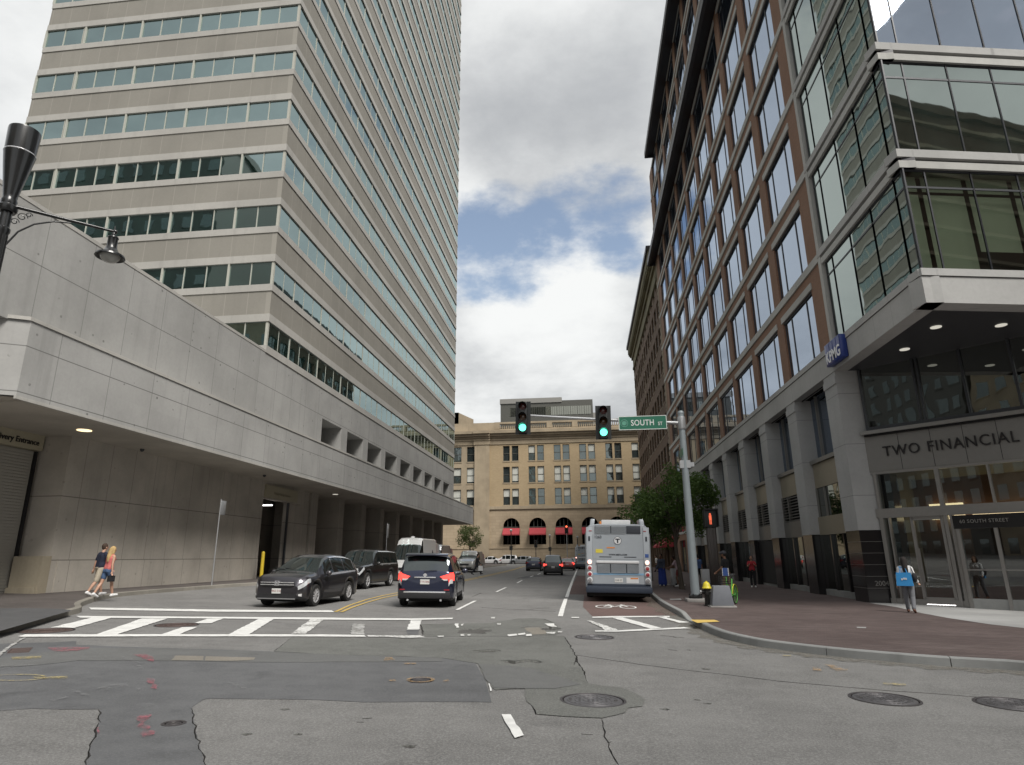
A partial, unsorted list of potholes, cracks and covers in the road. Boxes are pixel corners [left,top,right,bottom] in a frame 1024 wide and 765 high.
manhole cover [848,691,923,707]
crack [84,710,102,765]
manhole cover [560,693,627,708]
crack [192,710,206,765]
crack [566,640,587,681]
crack [584,720,619,765]
manhole cover [972,696,1024,712]
